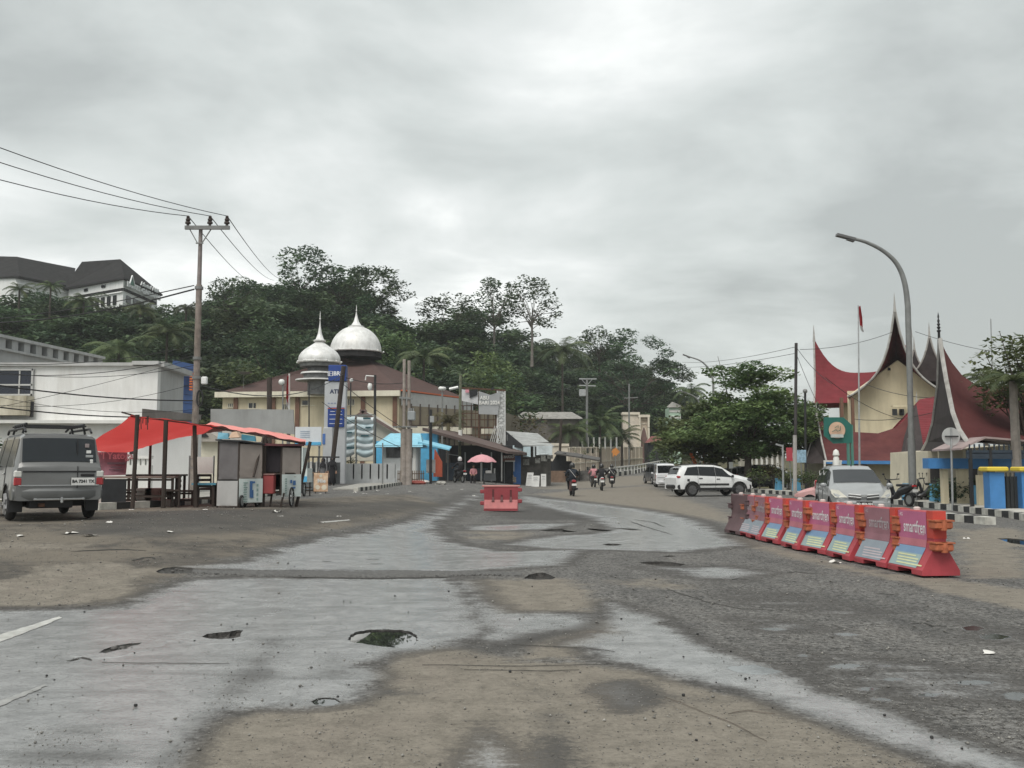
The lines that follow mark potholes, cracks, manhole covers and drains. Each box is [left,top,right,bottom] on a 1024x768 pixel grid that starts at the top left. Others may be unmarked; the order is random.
pothole [503,571,576,582]
pothole [615,559,708,569]
pothole [504,527,632,535]
pothole [69,639,167,658]
pothole [176,627,267,644]
pothole [322,626,444,653]
